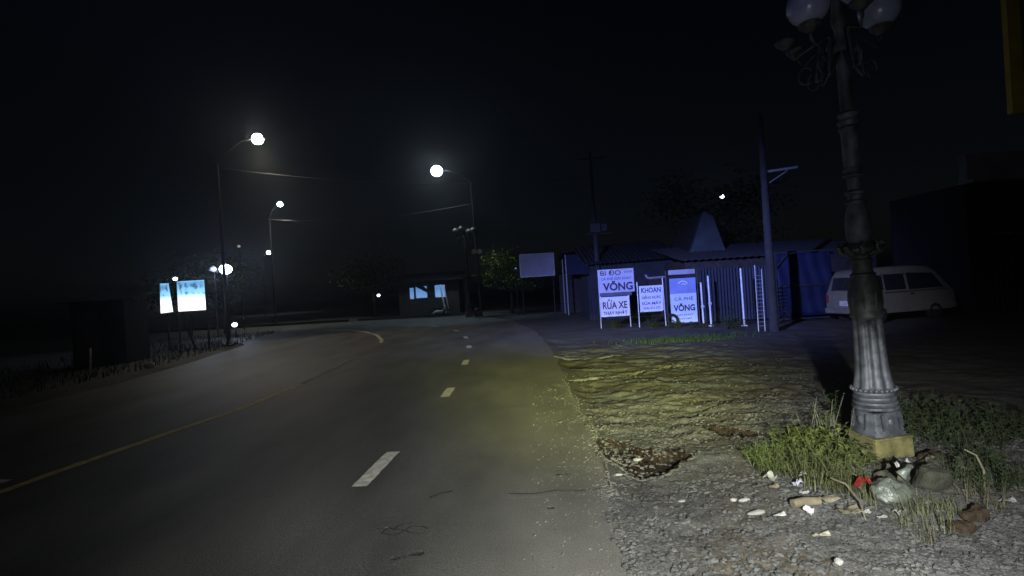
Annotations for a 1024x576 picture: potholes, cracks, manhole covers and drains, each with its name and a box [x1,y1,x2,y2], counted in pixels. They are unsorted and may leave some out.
crack [422,488,459,500]
pothole [594,438,695,481]
crack [501,485,611,498]
pothole [703,425,768,437]
